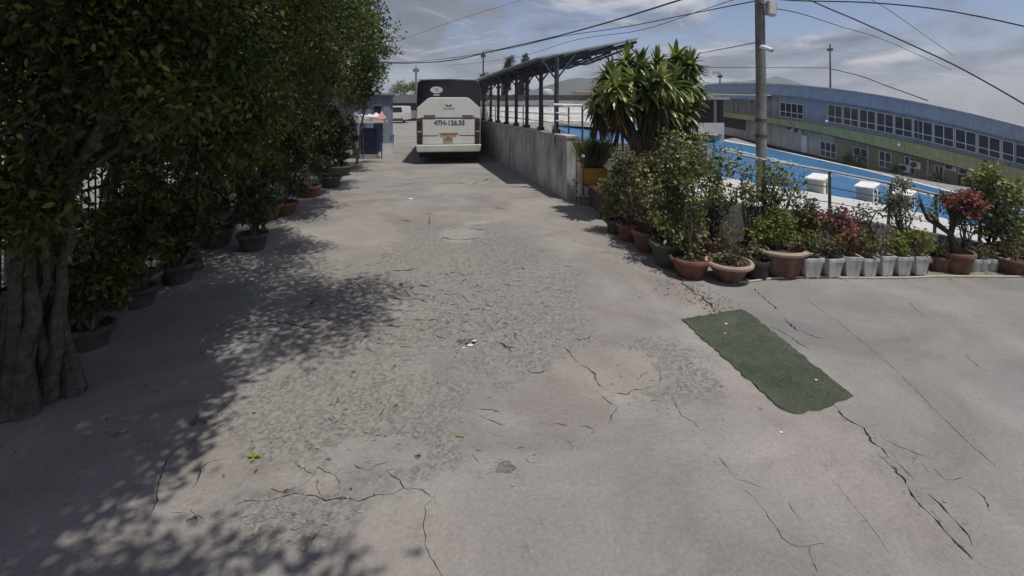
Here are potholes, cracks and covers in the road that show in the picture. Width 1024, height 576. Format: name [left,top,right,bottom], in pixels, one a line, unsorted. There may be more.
crack [754,289,823,349]
crack [674,402,823,571]
crack [236,368,442,575]
crack [266,207,716,450]
crack [812,303,997,468]
crack [149,452,230,519]
